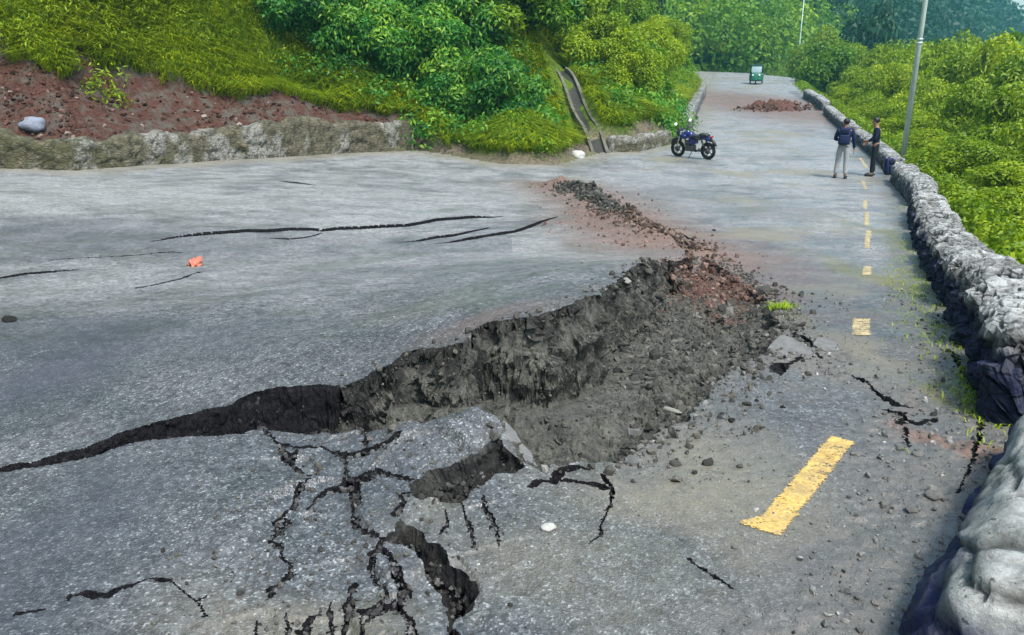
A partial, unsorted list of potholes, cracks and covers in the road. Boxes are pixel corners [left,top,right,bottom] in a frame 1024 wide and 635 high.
pothole [309,257,787,469]
crack [686,557,734,589]
crack [0,384,501,635]
crack [0,216,557,289]
crack [946,349,985,493]
crack [851,375,938,447]
crack [527,465,615,544]
